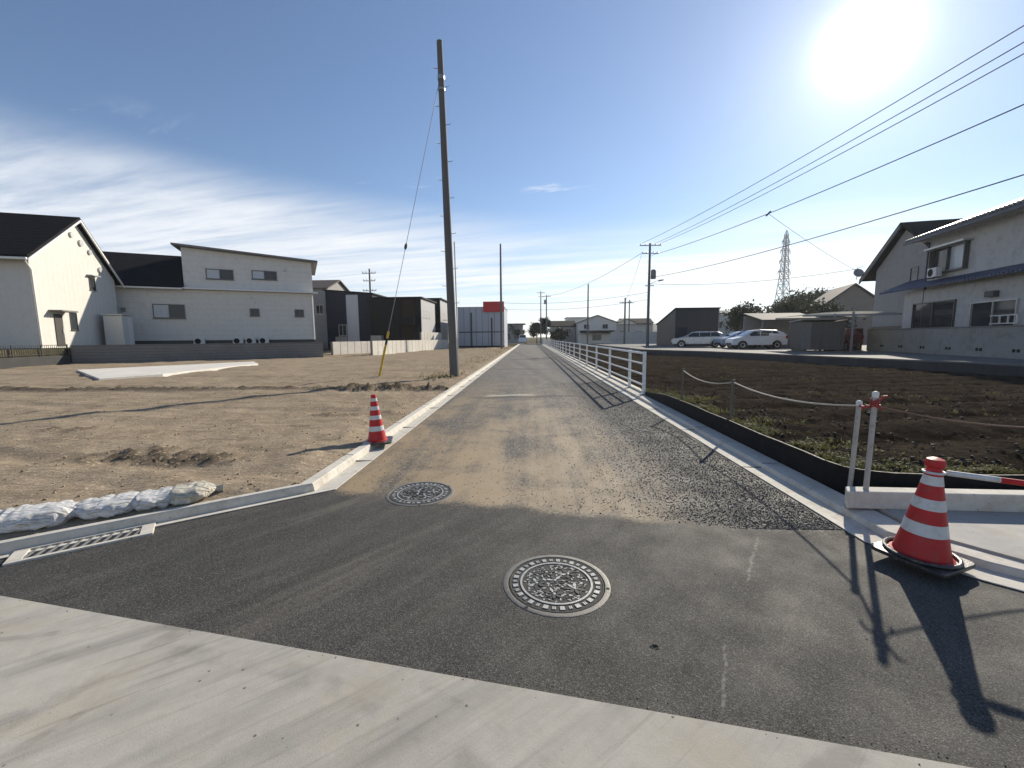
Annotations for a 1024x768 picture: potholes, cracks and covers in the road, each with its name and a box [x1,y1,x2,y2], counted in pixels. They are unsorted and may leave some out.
manhole cover [386,481,454,506]
drain grate [2,522,156,567]
manhole cover [503,555,611,618]
